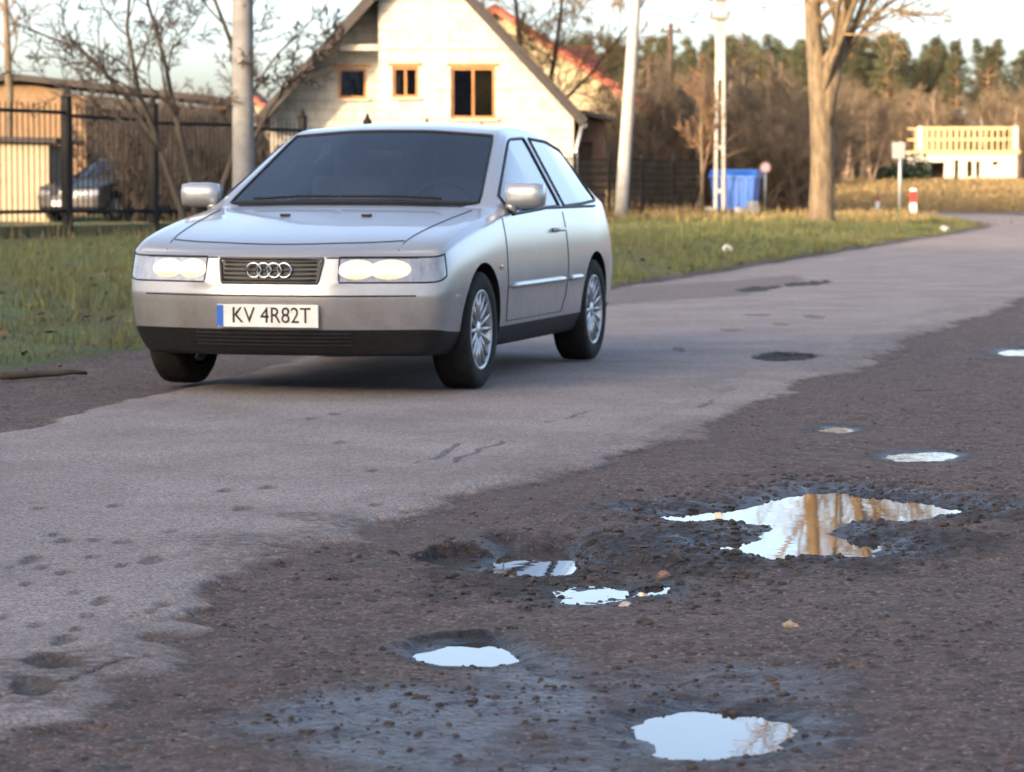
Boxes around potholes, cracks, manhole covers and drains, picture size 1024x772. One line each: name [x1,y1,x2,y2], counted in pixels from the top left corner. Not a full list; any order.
pothole [401,628,531,670]
pothole [584,694,815,760]
pothole [2,674,67,696]
crack [414,440,509,463]
pothole [879,449,964,462]
pothole [407,541,588,588]
pothole [20,651,89,670]
pothole [614,483,1021,559]
